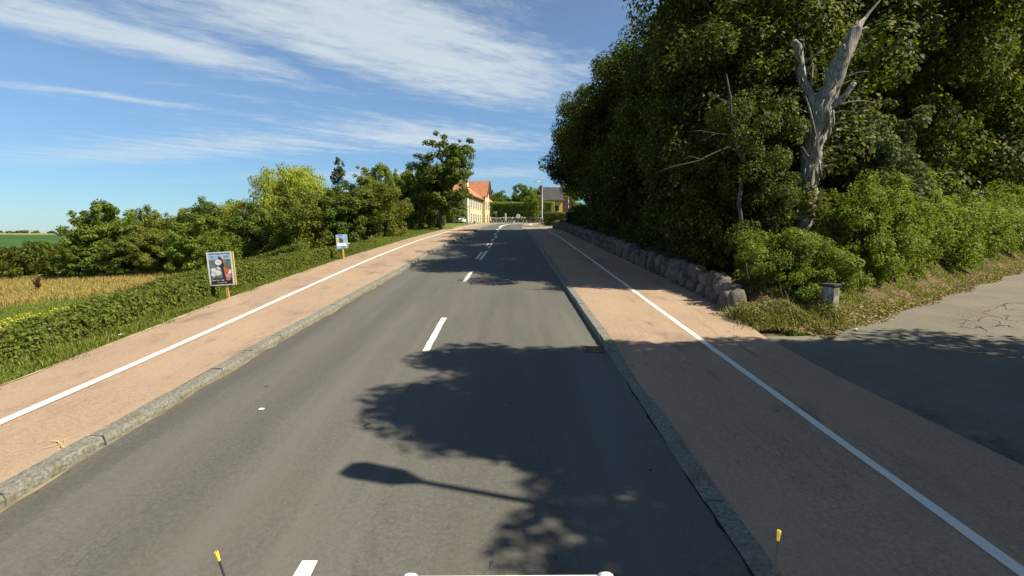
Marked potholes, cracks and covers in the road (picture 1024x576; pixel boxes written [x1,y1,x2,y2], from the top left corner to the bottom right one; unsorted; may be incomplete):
crack [961,303,1022,331]
